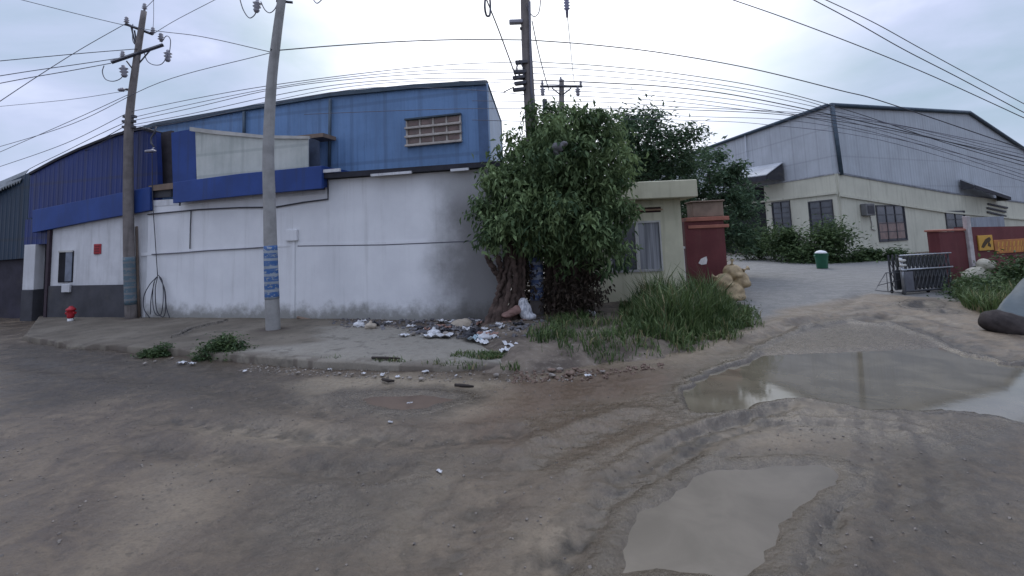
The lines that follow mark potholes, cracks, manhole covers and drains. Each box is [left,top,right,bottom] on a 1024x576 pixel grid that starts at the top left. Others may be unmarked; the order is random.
pothole [583,454,867,576]
crack [170,319,228,338]
pothole [670,319,1024,426]
pothole [331,388,476,415]
